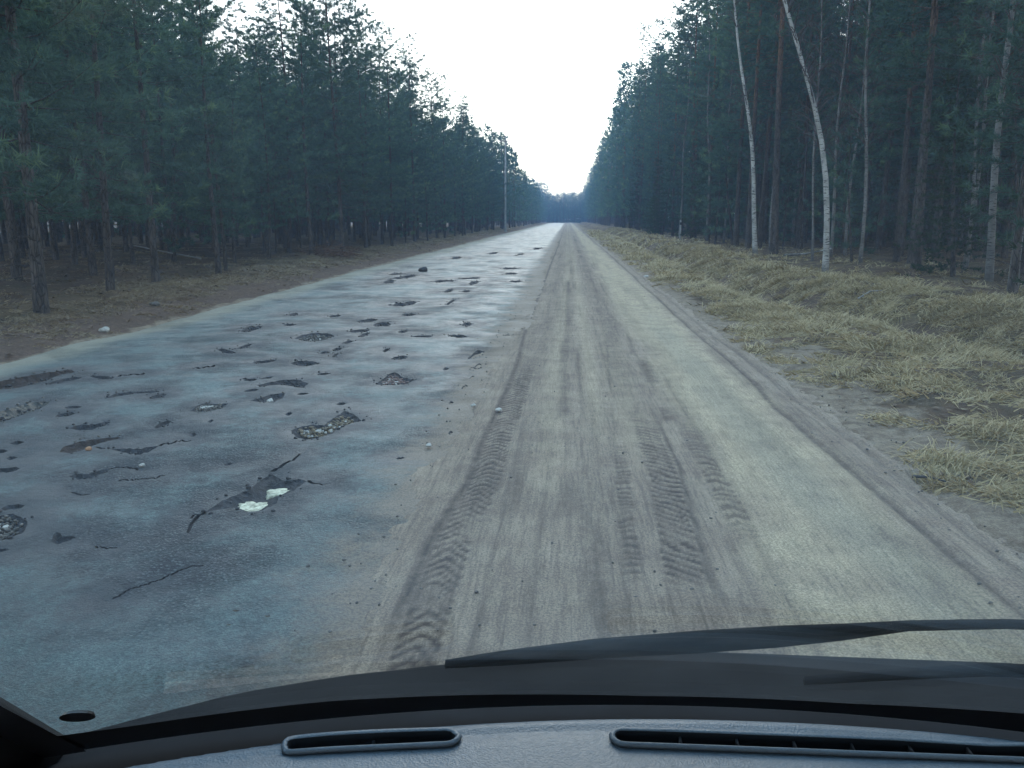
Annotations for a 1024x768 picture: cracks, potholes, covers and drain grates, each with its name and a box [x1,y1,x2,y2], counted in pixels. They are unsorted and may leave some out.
crack [111,466,165,481]
pothole [290,331,335,342]
crack [112,565,204,599]
pothole [0,368,84,390]
pothole [373,372,415,385]
pothole [291,407,372,441]
pothole [55,434,120,454]
pothole [201,471,306,515]
pothole [251,391,290,403]
pothole [0,397,58,423]
pothole [179,400,228,413]
pothole [0,509,34,540]
